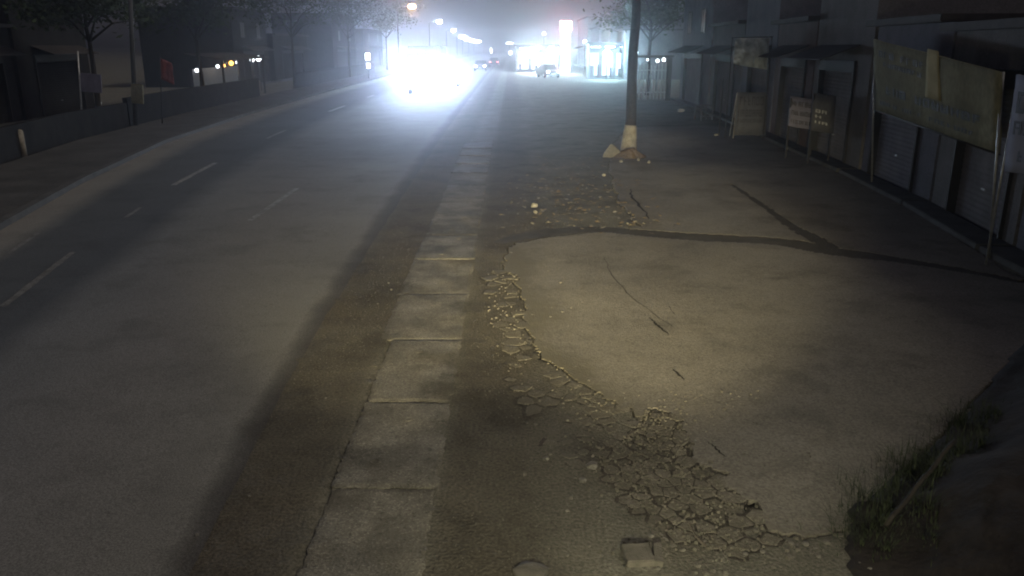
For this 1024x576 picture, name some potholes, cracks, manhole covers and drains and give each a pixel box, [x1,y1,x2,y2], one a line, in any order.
crack [479,185,1020,562]
